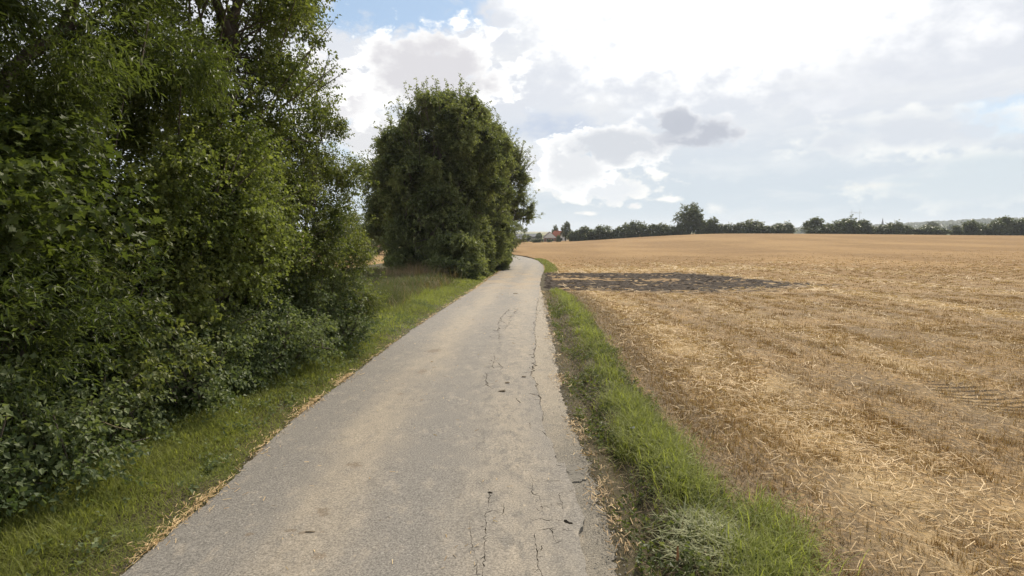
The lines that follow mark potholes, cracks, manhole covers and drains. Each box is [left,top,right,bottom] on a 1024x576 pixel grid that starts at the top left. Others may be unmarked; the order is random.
crack [528,465,573,576]
crack [469,489,506,576]
crack [483,300,549,438]
